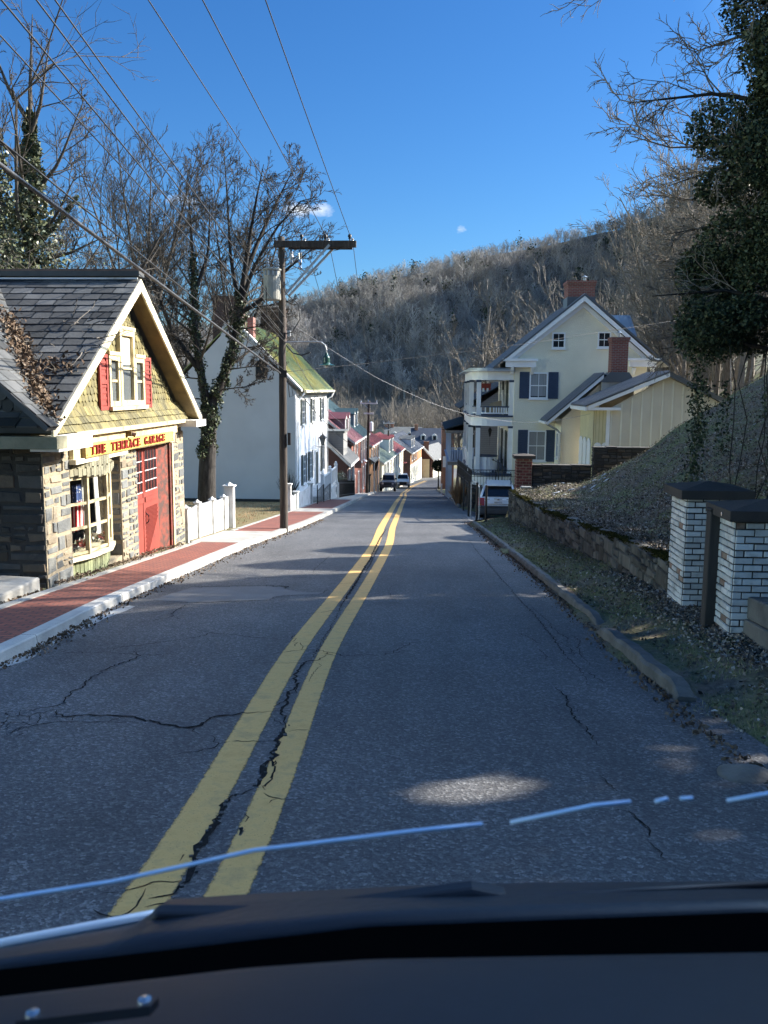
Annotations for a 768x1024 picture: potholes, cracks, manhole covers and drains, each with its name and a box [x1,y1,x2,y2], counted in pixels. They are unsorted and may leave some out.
crack [600,775,667,861]
crack [0,634,432,917]
